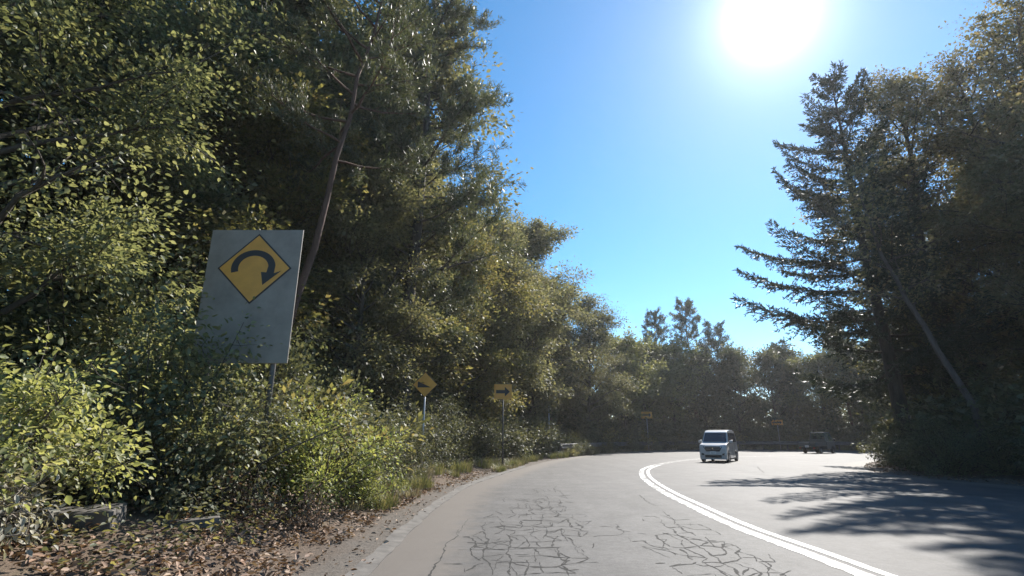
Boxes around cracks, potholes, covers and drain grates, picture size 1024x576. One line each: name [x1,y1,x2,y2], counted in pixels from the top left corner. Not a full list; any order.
crack [594,511,789,576]
crack [428,485,594,576]
